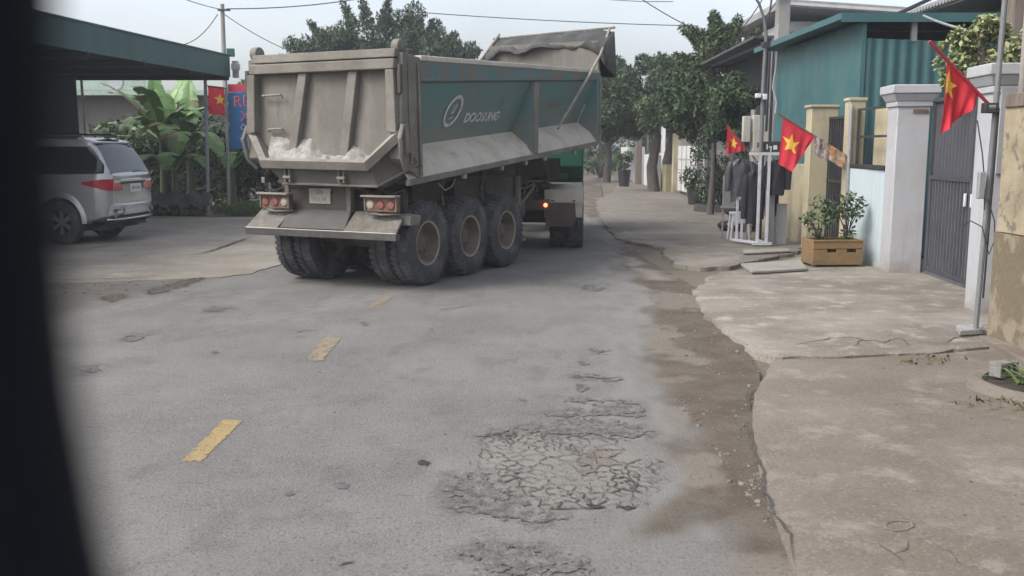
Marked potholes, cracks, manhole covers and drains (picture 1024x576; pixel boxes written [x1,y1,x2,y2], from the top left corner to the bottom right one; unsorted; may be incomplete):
crack [470,432,668,510]
pothole [118,334,150,344]
